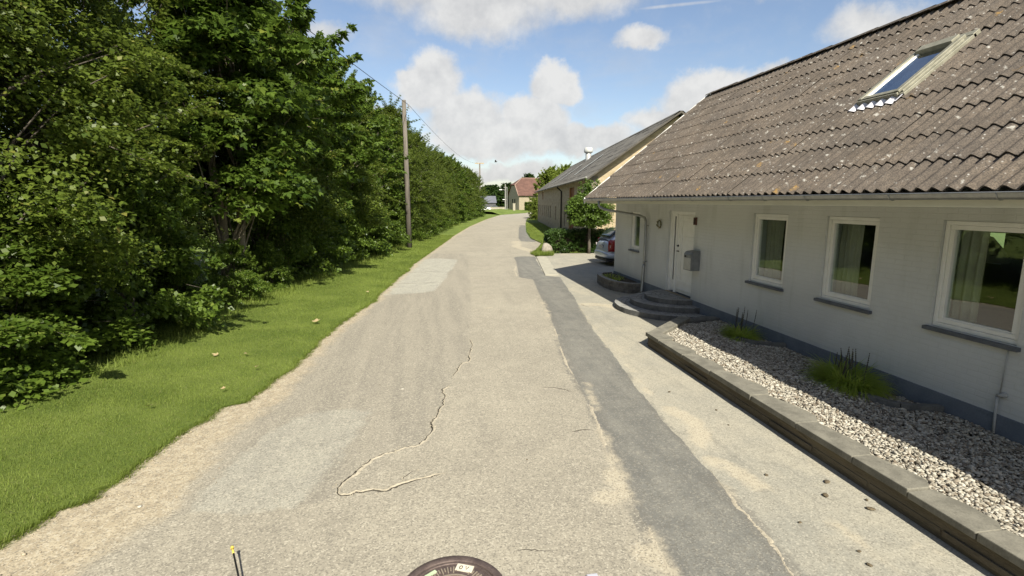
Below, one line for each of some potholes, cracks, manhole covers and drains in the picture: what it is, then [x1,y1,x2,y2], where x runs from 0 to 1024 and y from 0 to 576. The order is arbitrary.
manhole cover [408,556,502,576]
